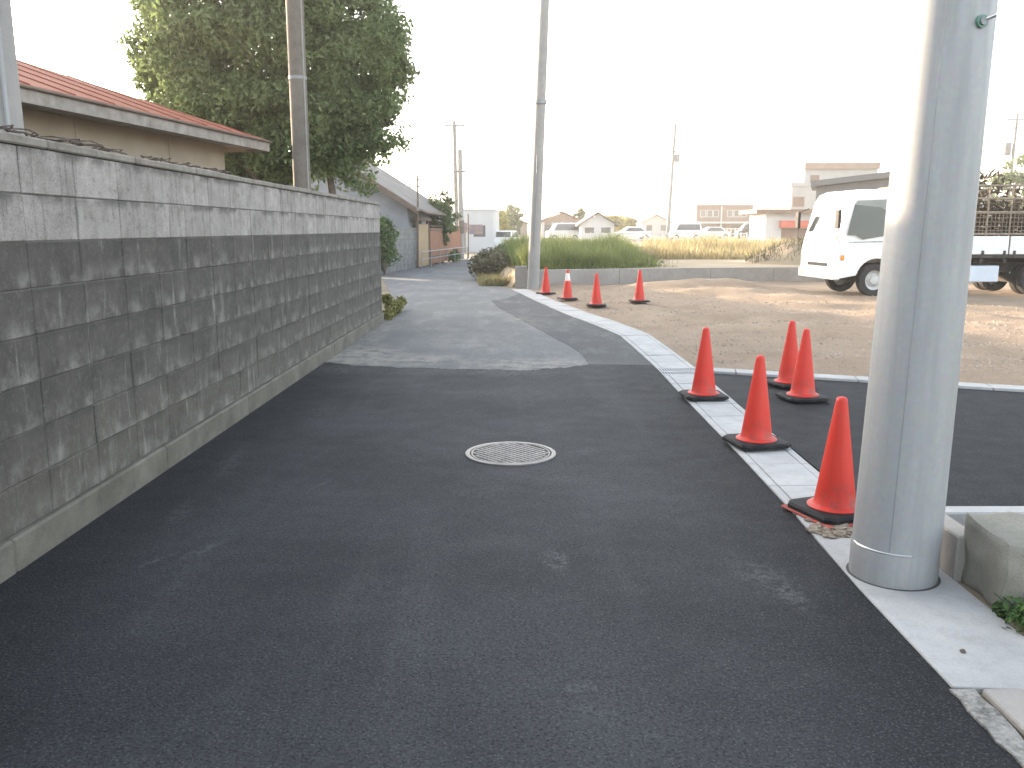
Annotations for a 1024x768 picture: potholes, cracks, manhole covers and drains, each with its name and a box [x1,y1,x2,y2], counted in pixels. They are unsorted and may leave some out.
manhole cover [465,441,556,466]
drain grate [657,368,695,376]
